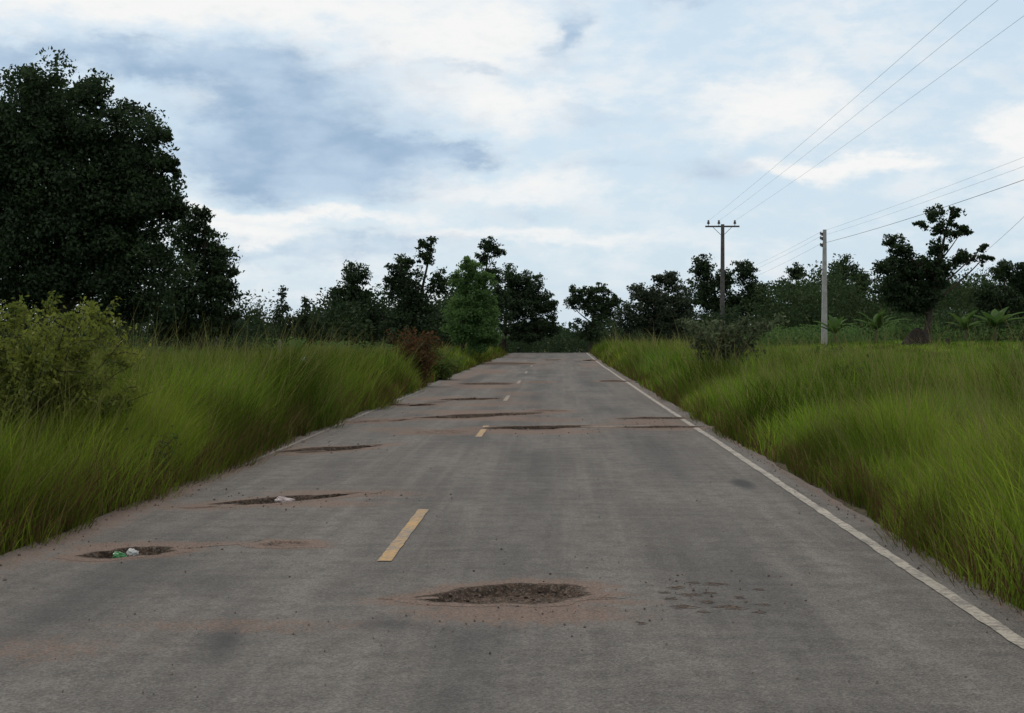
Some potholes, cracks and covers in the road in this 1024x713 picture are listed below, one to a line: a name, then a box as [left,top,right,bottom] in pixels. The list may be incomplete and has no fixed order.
pothole [262,444,393,454]
pothole [392,581,610,607]
pothole [177,490,387,508]
pothole [56,545,193,561]
